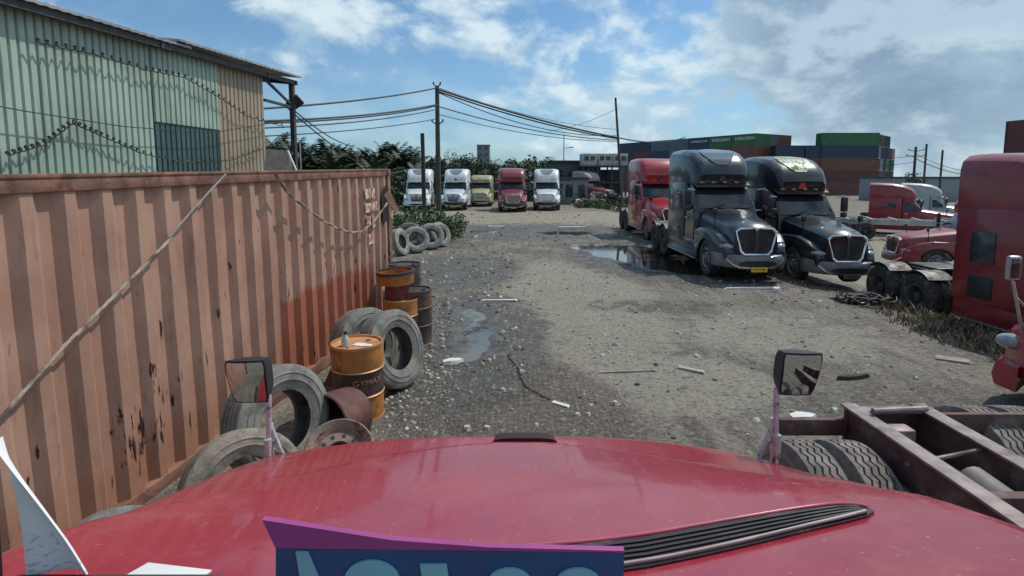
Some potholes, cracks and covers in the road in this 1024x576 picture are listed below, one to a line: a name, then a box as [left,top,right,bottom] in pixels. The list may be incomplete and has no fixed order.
crack [499,341,550,400]
